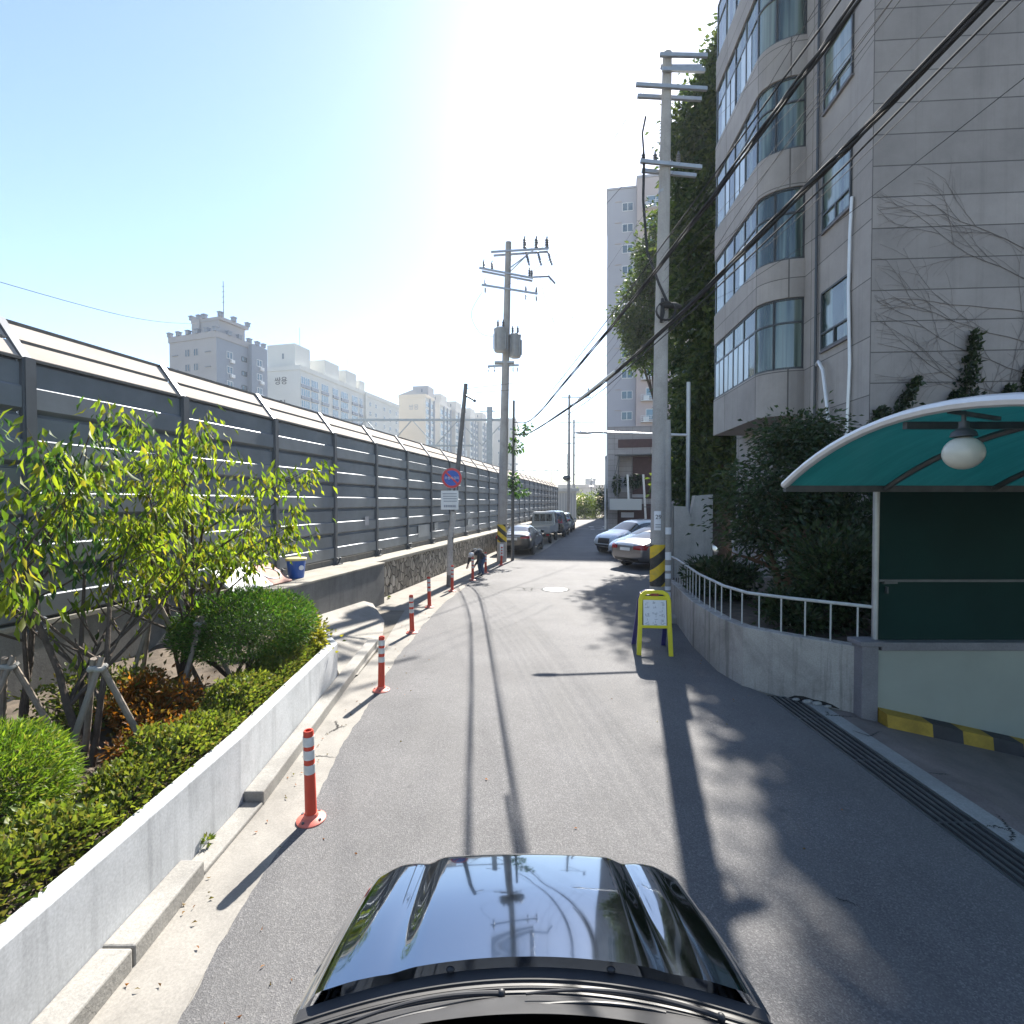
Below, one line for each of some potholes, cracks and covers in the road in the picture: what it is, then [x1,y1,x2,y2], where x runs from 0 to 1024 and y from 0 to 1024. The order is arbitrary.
drain grate [767,695,1024,890]
crack [987,814,1016,841]
